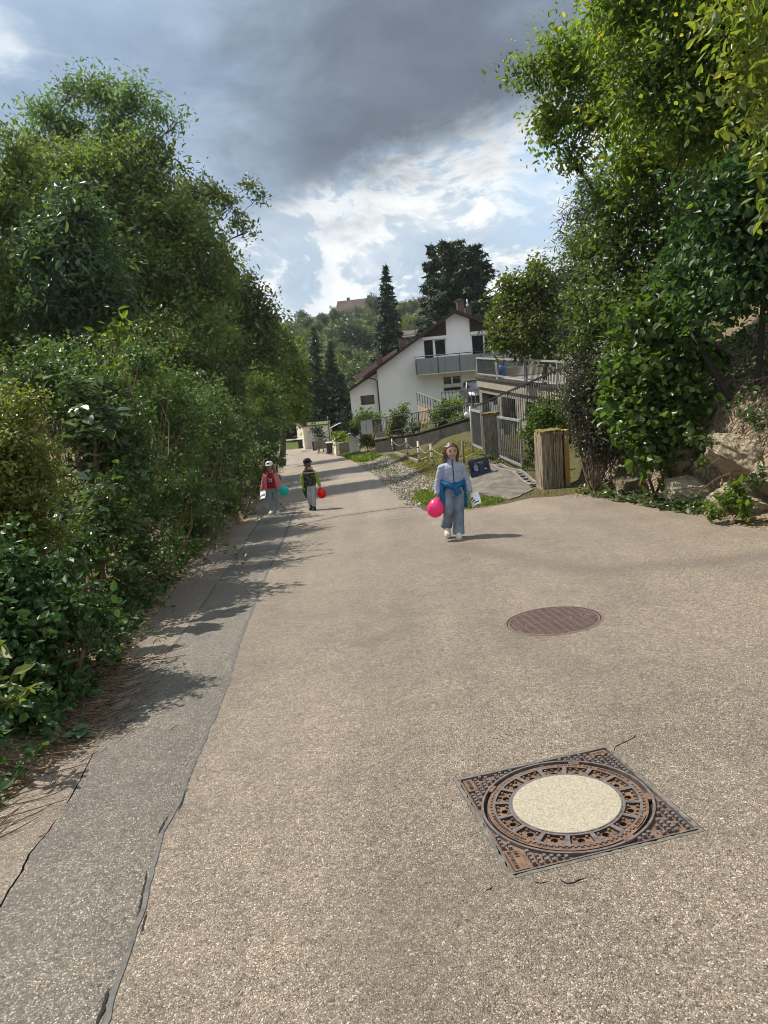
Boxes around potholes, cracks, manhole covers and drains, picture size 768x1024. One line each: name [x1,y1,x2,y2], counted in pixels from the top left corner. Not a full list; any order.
manhole cover [454,745,704,879]
crack [0,750,95,907]
manhole cover [505,606,604,636]
